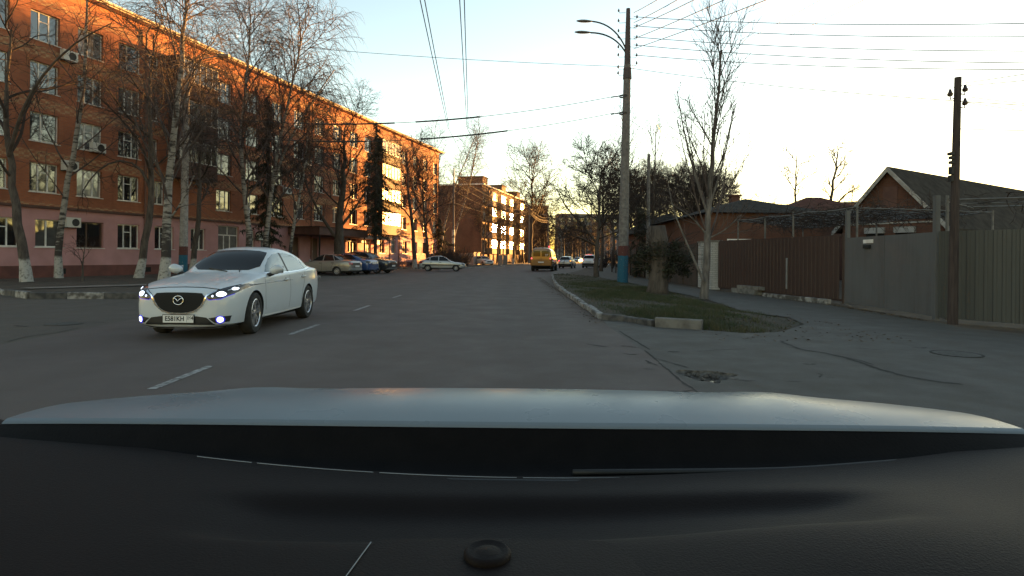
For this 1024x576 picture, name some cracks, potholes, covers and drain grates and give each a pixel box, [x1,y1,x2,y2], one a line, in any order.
manhole cover [929,350,985,358]
pothole [675,370,738,383]
